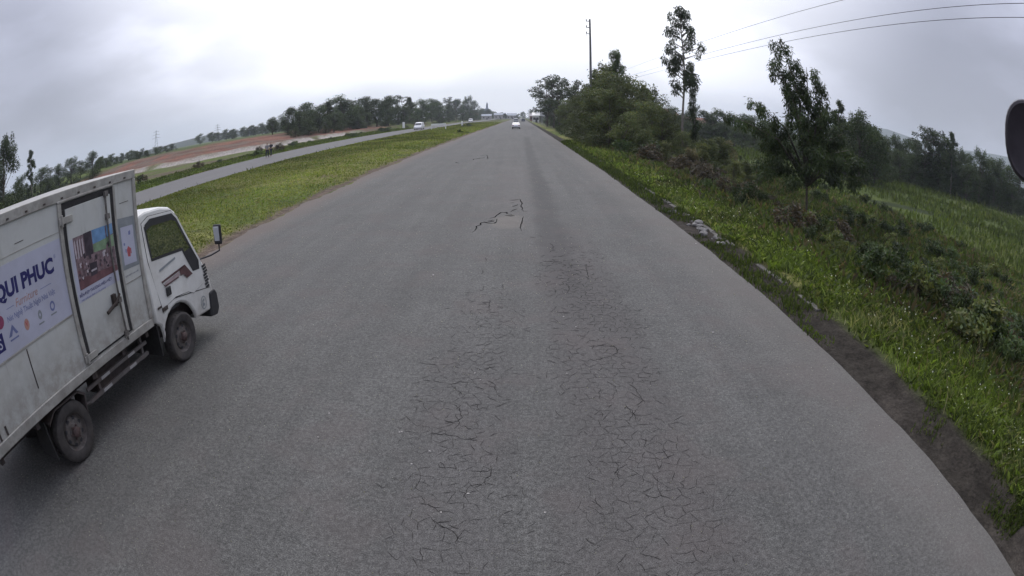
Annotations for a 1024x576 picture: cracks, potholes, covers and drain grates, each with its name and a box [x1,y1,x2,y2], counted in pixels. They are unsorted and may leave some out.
crack [534,237,749,576]
crack [473,199,524,232]
crack [376,258,537,576]
